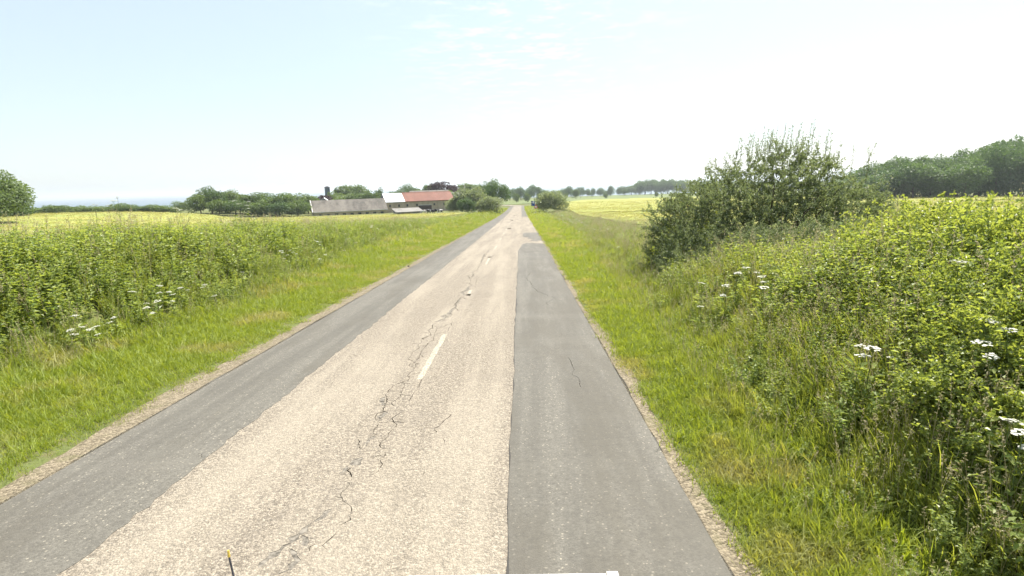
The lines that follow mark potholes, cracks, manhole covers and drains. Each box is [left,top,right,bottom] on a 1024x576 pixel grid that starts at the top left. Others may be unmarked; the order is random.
crack [258,250,489,574]
